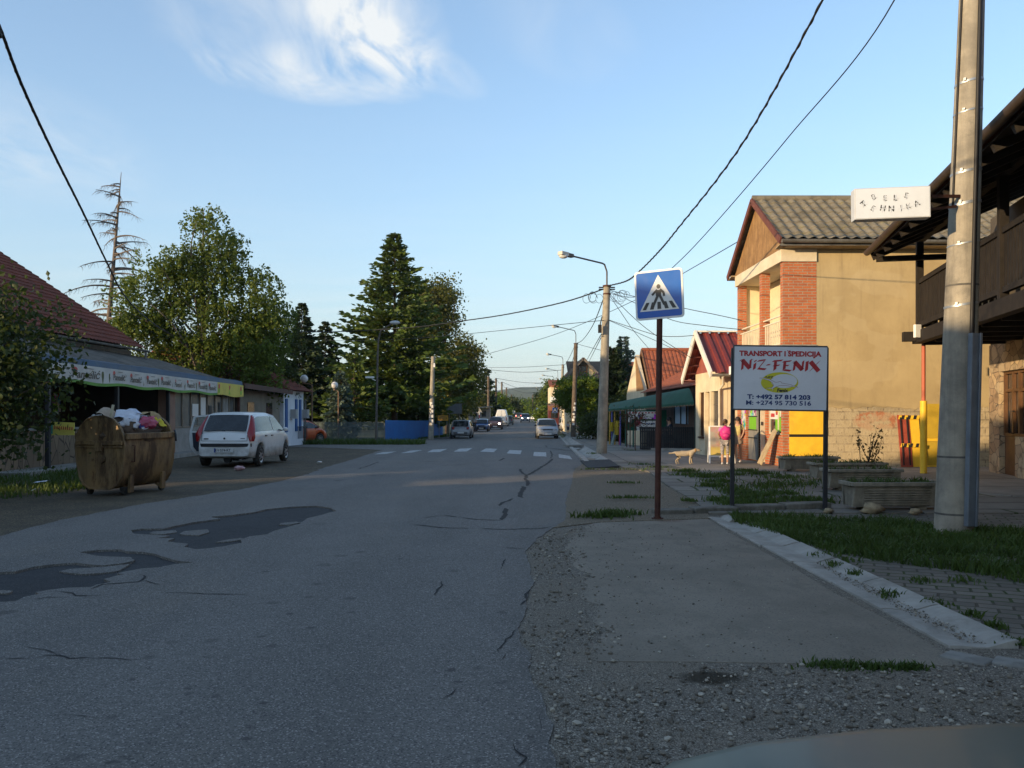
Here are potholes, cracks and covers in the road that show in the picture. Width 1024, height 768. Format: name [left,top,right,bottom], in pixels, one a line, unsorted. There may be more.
crack [413,445,569,594]
crack [513,708,559,766]
crack [35,575,226,601]
crack [26,646,130,660]
